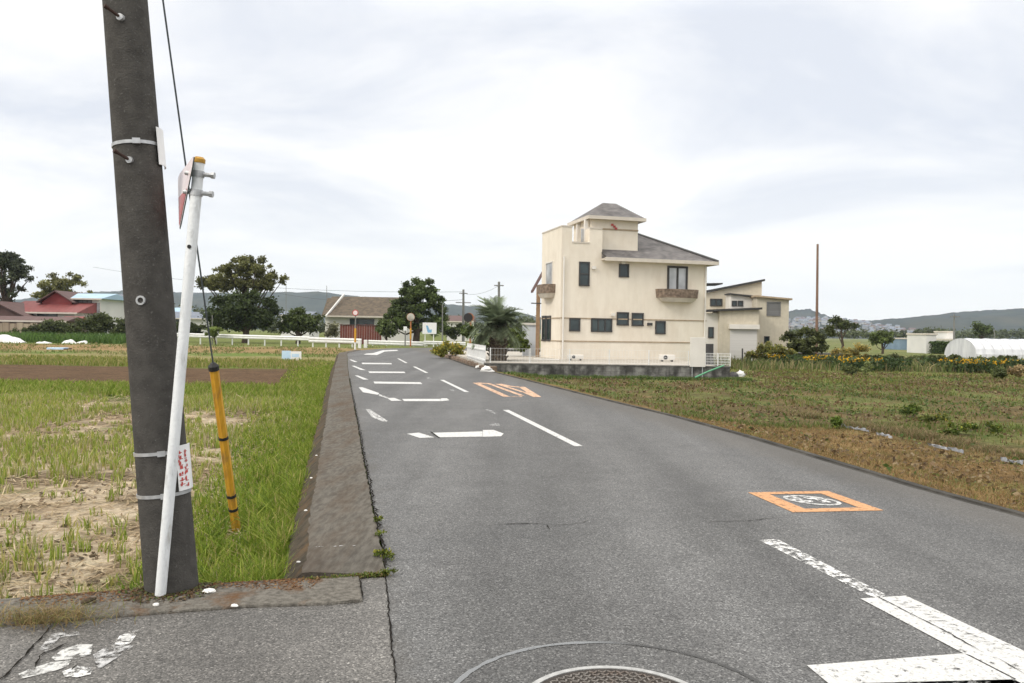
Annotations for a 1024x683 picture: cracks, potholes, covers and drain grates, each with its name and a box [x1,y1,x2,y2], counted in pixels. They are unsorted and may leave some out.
manhole cover [532,666,687,683]
crack [350,381,389,568]
